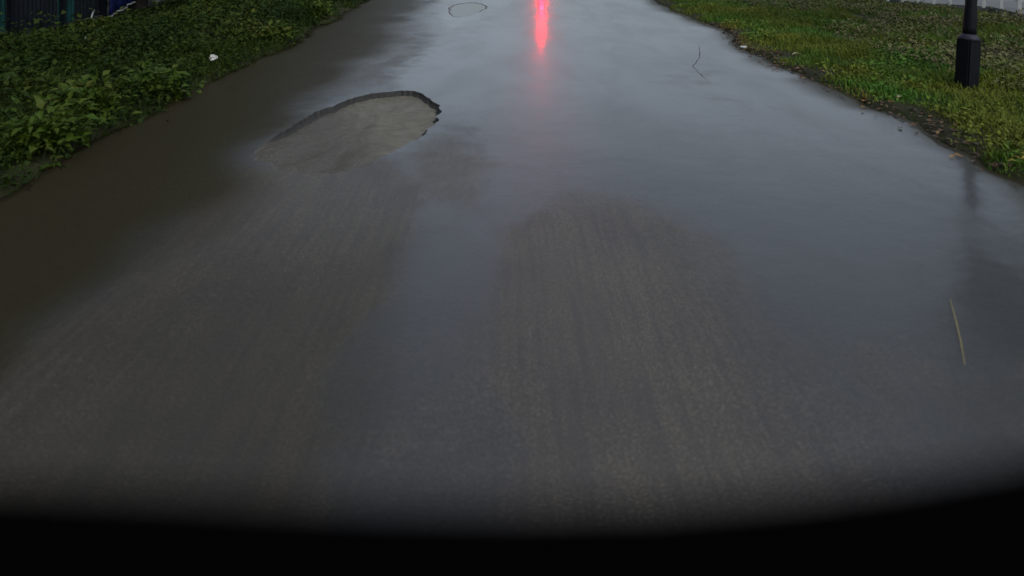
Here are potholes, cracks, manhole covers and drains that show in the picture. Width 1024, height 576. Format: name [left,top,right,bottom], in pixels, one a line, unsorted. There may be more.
pothole [254,90,442,175]
pothole [448,2,488,17]
